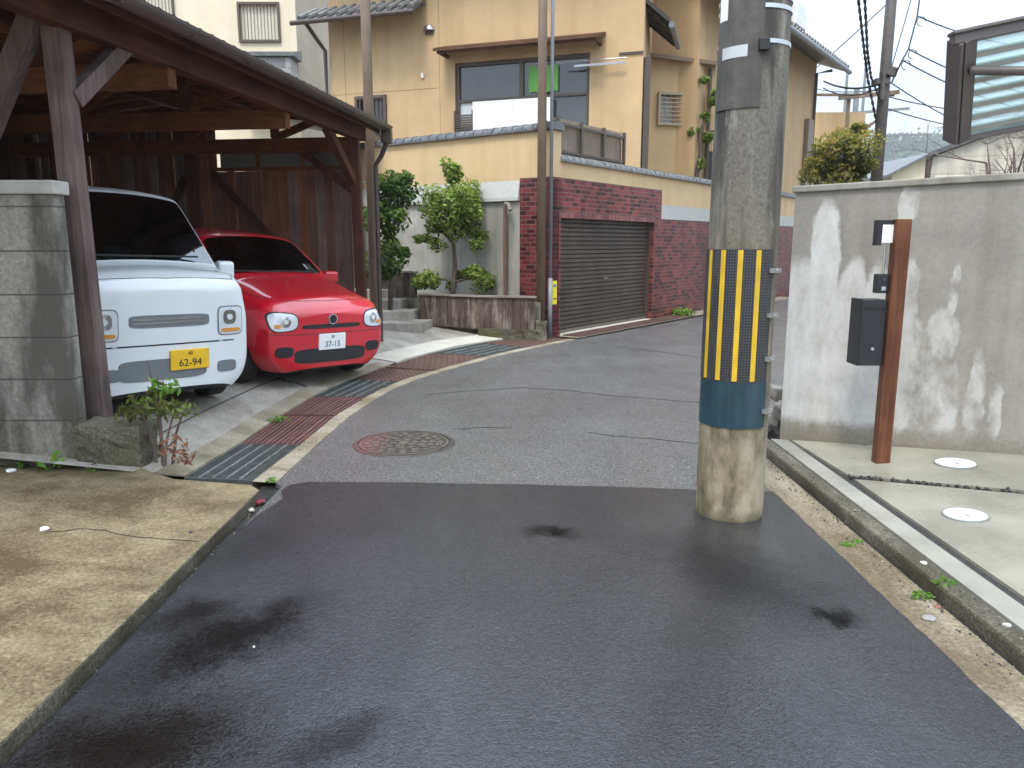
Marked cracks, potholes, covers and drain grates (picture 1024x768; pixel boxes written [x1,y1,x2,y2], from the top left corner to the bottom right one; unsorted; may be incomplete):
utility cover [941,507,990,522]
crack [424,388,694,402]
manhole cover [352,431,455,457]
utility cover [933,457,978,469]
